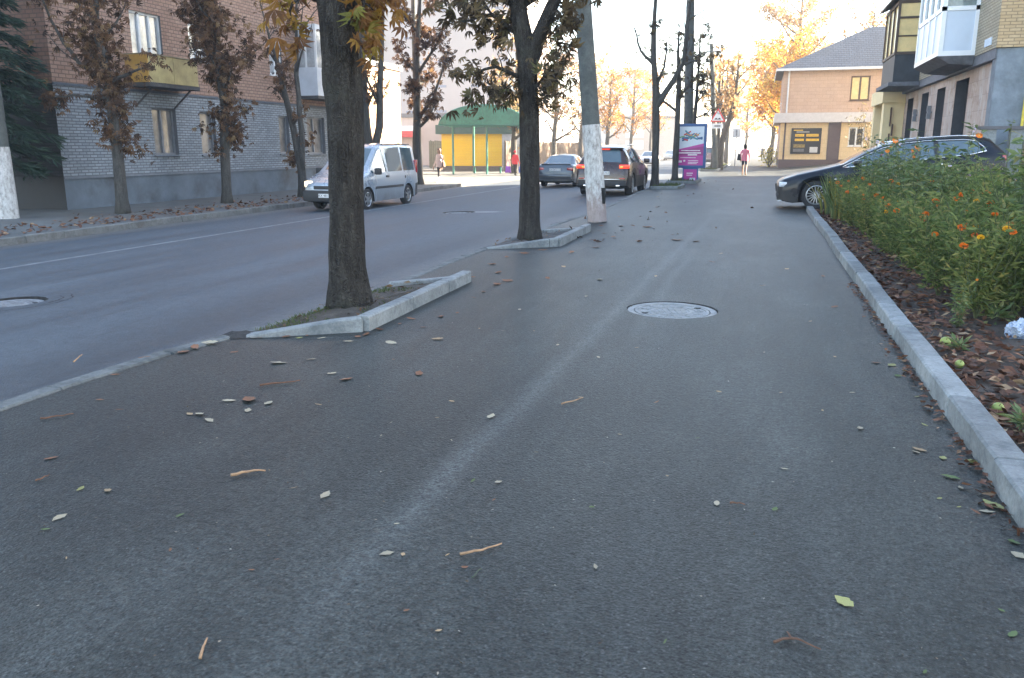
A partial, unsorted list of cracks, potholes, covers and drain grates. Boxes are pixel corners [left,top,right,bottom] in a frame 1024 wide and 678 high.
manhole cover [628,302,717,319]
manhole cover [0,299,44,307]
